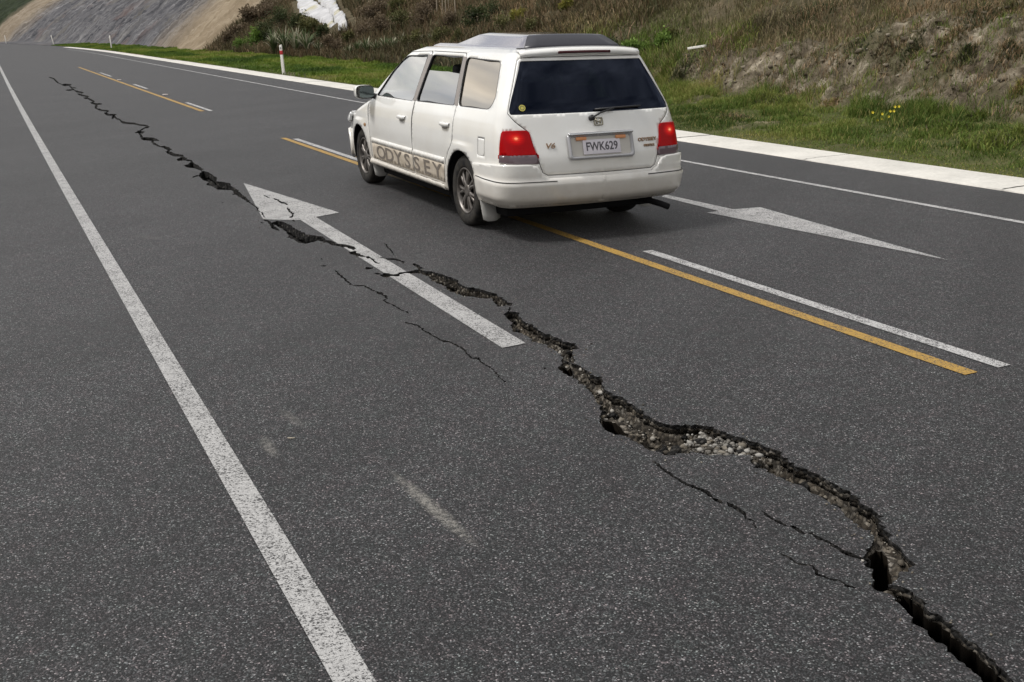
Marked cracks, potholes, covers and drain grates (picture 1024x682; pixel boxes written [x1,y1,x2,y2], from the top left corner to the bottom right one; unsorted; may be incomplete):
crack [323,265,506,382]
crack [652,461,856,588]
